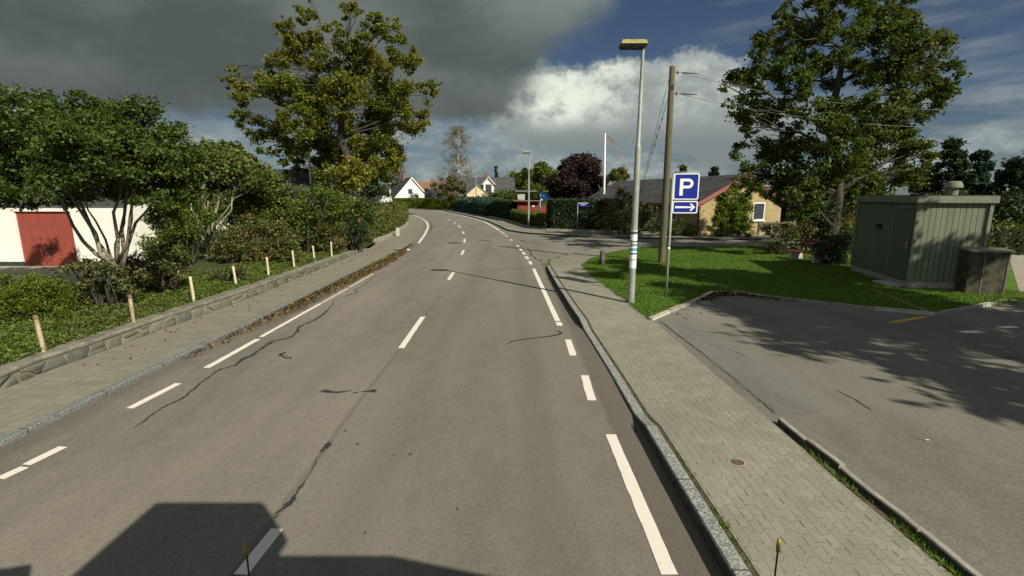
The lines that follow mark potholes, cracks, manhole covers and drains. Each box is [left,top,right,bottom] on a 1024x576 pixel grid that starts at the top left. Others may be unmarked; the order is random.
manhole cover [727,458,747,467]
crack [684,317,773,358]
